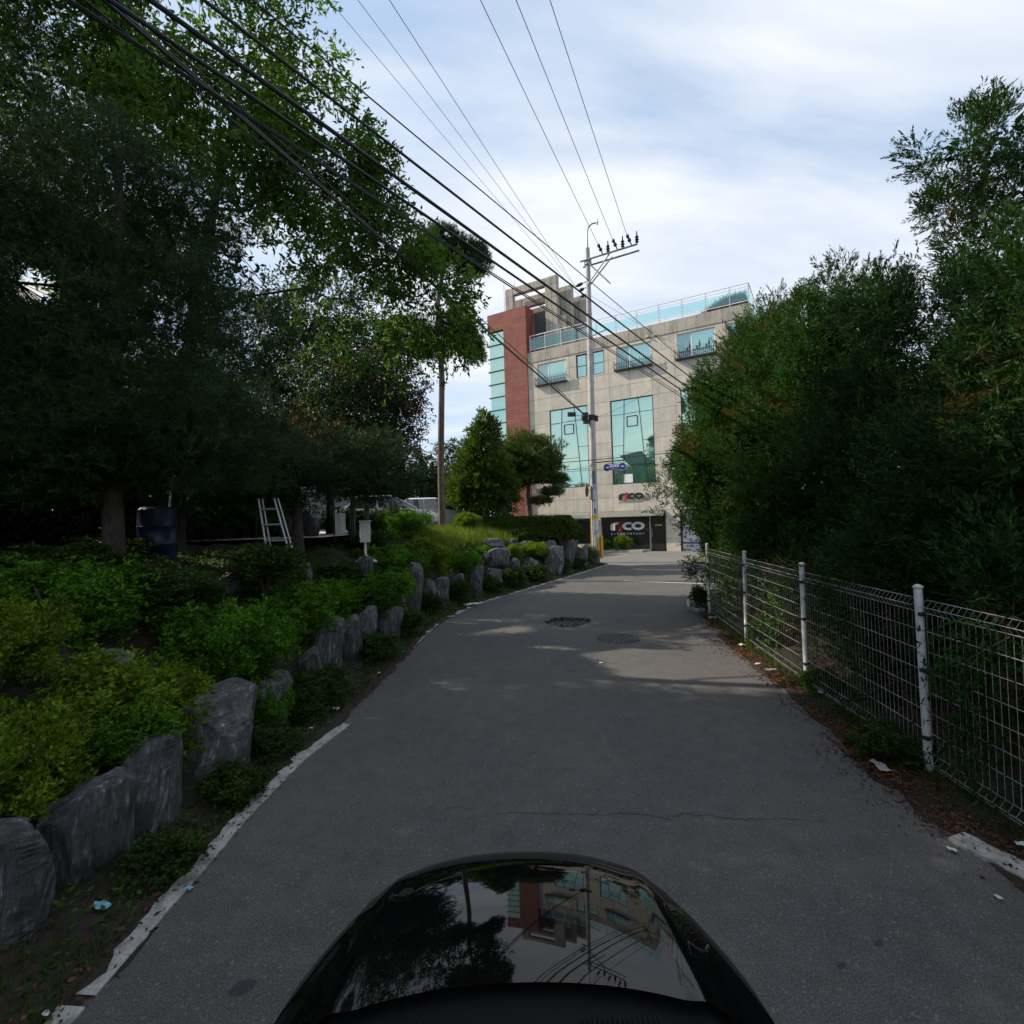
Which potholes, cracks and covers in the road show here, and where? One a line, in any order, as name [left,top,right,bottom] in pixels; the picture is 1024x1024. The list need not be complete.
manhole cover [596,633,641,644]
crack [449,806,845,822]
